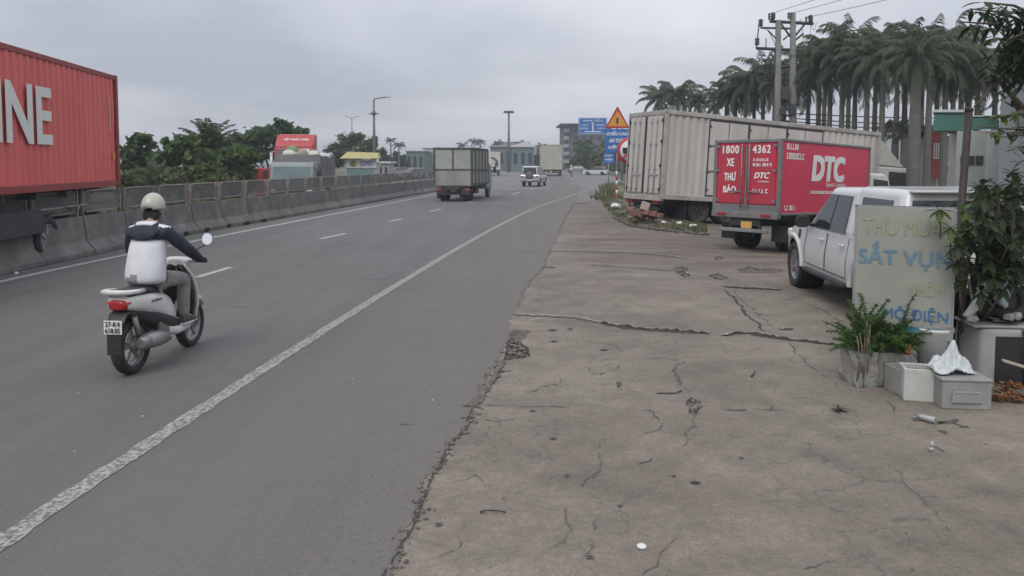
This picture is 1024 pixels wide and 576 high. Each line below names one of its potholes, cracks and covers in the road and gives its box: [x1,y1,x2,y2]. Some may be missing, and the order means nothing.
crack [639,357,691,438]
pothole [504,330,531,361]
pothole [686,397,703,415]
crack [513,204,845,376]
crack [643,537,676,574]
crack [381,408,514,576]
pothole [673,266,690,278]
crack [888,468,950,530]
crack [542,442,602,558]
